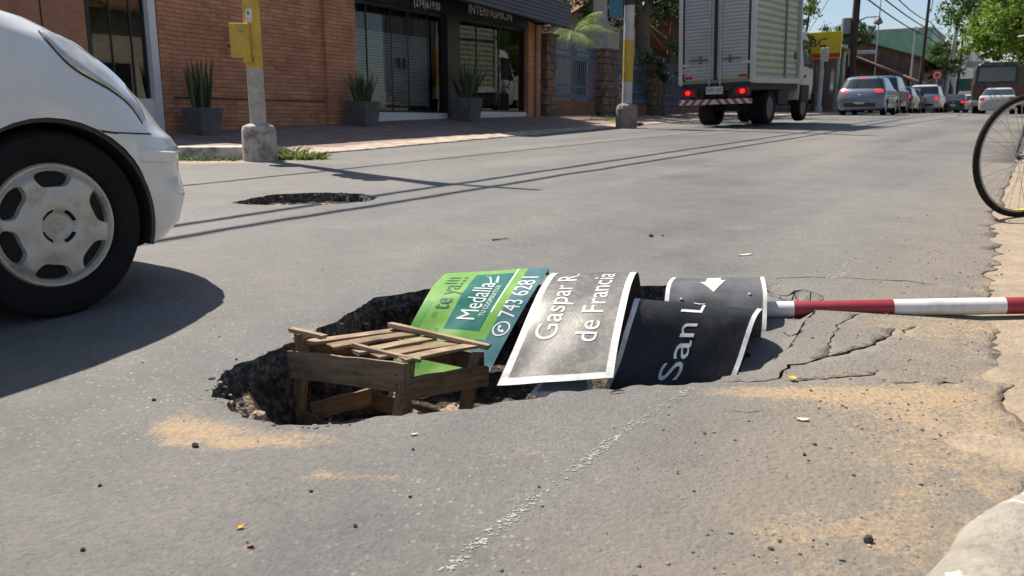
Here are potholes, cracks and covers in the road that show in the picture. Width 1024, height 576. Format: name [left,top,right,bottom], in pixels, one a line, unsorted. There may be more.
pothole [232,192,377,205]
pothole [211,285,751,425]
crack [733,277,958,384]
